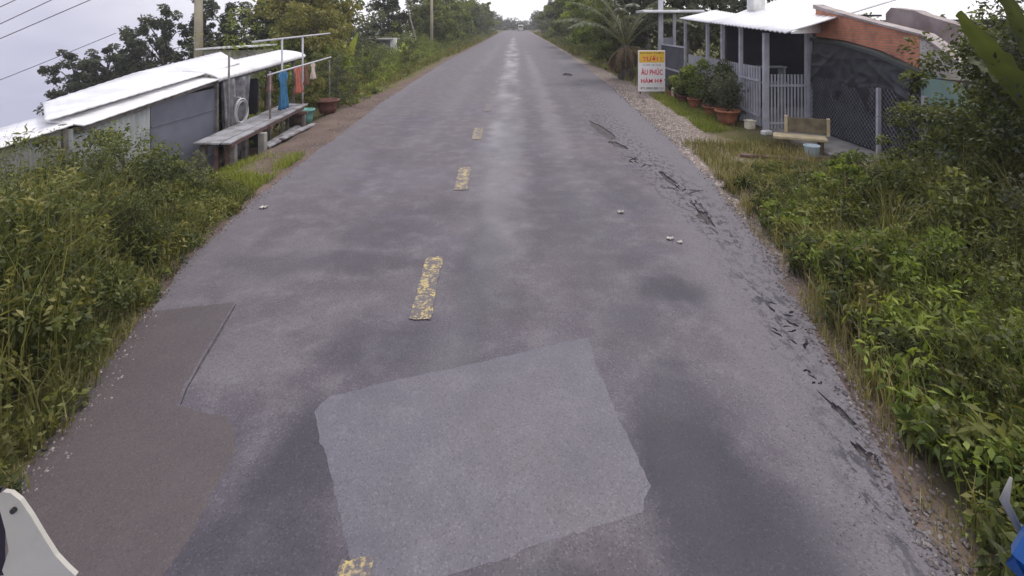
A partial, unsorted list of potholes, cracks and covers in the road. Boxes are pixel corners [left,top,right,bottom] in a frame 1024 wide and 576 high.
crack [670,185,703,209]
crack [768,302,817,349]
